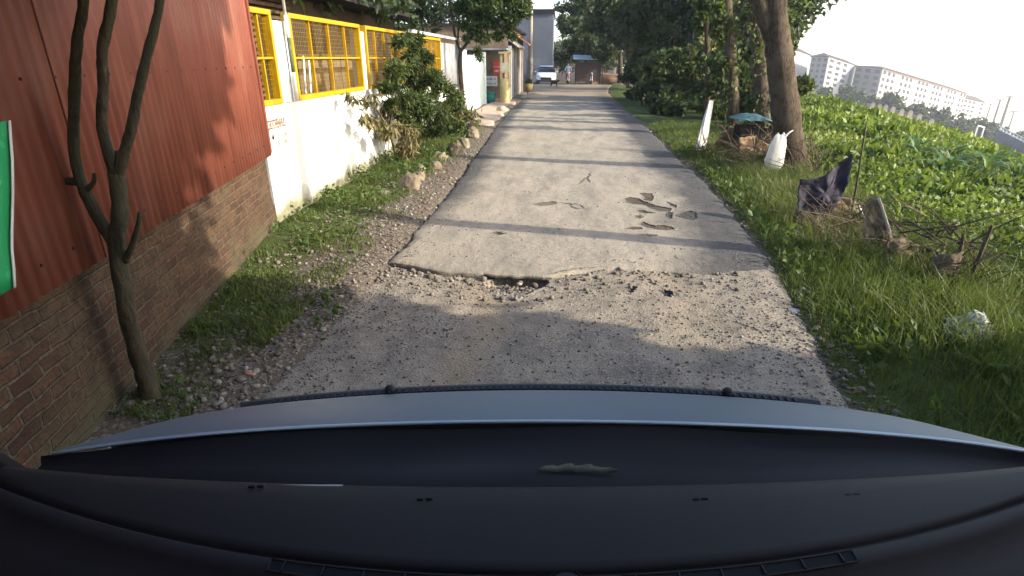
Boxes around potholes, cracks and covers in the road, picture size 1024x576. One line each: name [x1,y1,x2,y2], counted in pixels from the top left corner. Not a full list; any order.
pothole [624,197,674,212]
pothole [638,221,678,231]
pothole [477,278,554,304]
pothole [675,211,700,220]
